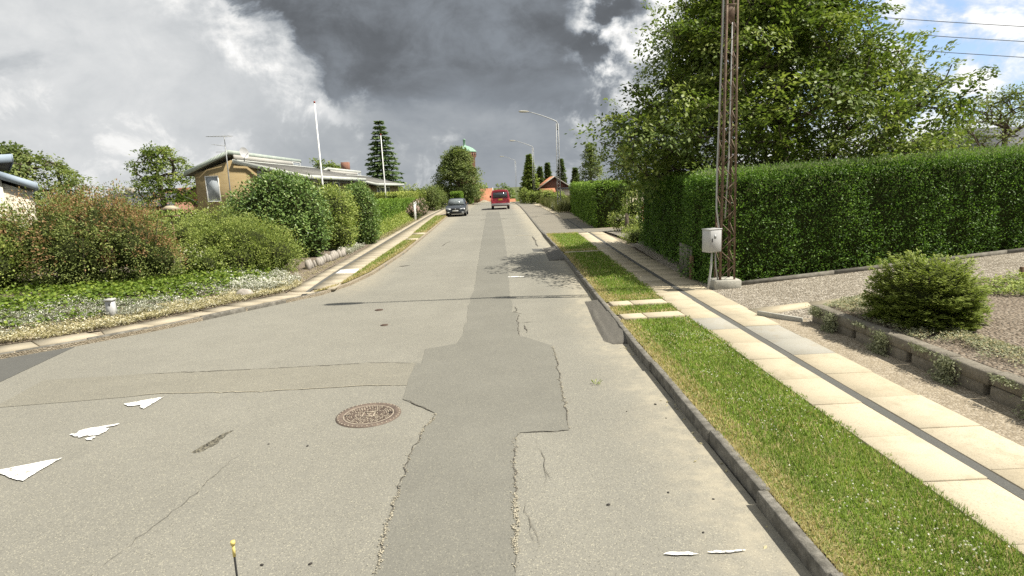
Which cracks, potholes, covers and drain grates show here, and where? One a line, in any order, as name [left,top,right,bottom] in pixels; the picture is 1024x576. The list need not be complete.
manhole cover [335,402,401,428]
